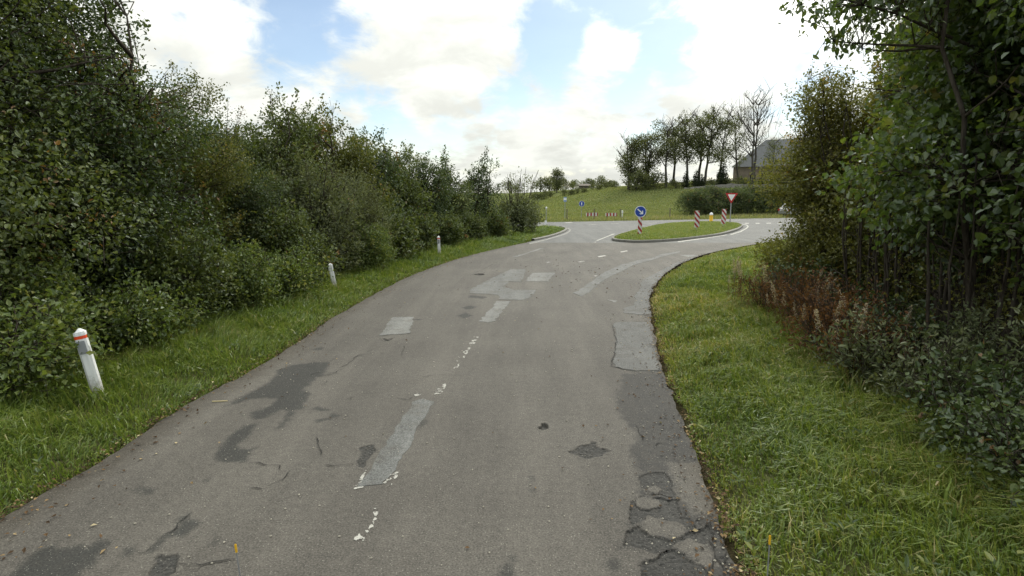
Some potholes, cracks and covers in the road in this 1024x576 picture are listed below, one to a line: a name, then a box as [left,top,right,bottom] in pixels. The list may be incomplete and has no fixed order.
pothole [534,421,552,433]
pothole [563,439,616,462]
pothole [634,470,682,498]
pothole [633,548,717,576]
pothole [623,494,703,532]
pothole [616,519,721,557]
